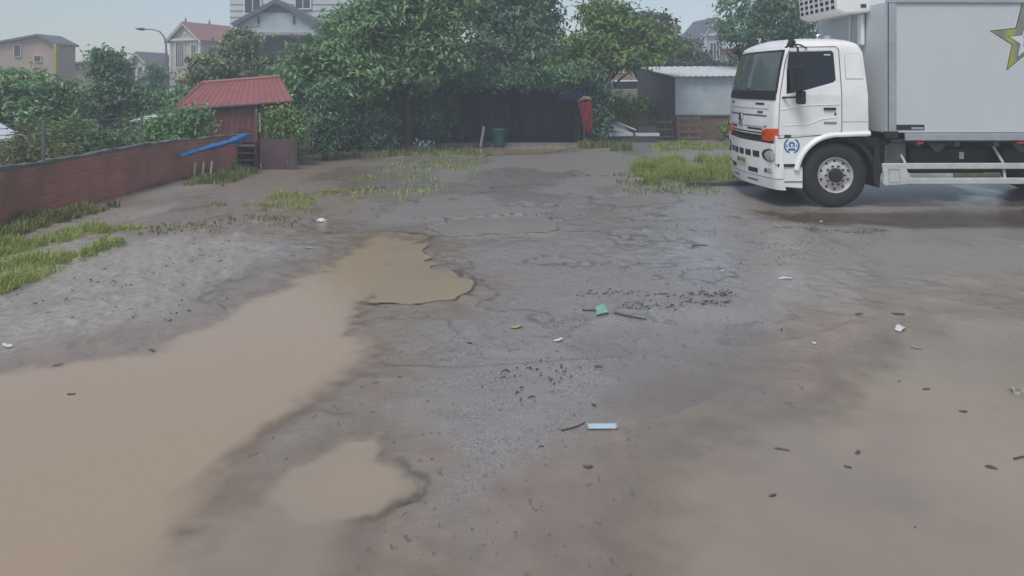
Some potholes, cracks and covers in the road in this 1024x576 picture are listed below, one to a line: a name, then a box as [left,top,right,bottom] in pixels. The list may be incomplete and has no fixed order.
pothole [362,242,484,307]
pothole [248,425,449,533]
